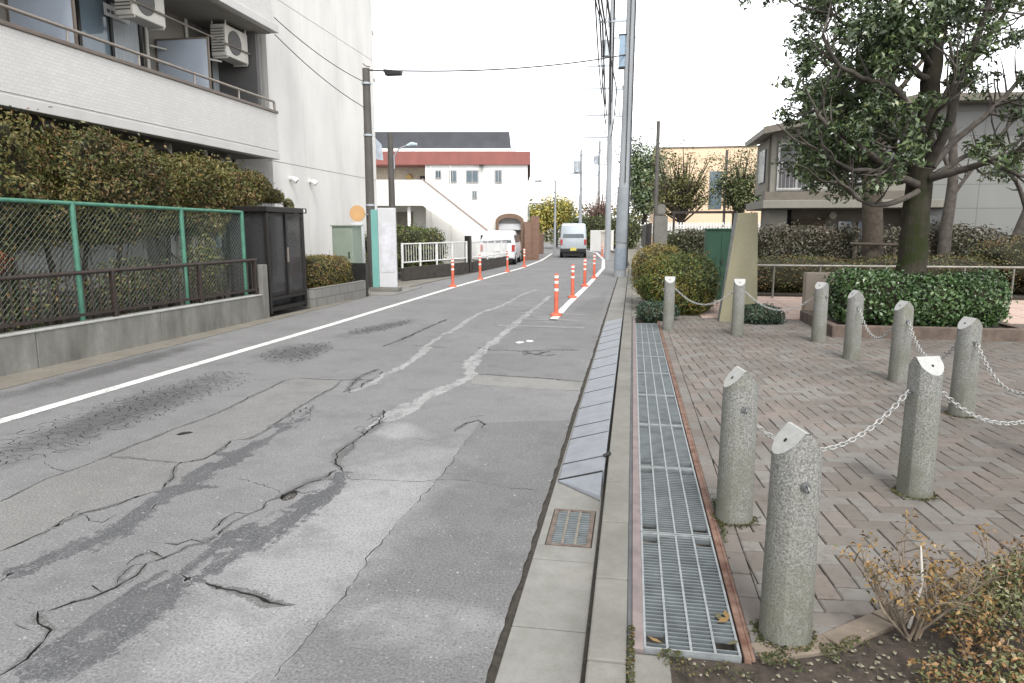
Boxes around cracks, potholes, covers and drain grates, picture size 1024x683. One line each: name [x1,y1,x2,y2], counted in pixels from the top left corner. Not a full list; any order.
drain grate [636,343,666,357]
crack [0,370,255,466]
drain grate [641,532,742,663]
crack [0,411,532,676]
drain grate [636,356,670,374]
drain grate [638,424,694,469]
drain grate [637,372,675,396]
drain grate [639,466,711,537]
drain grate [636,332,662,343]
drain grate [636,323,659,332]
pothole [280,490,298,501]
drain grate [637,394,683,426]
